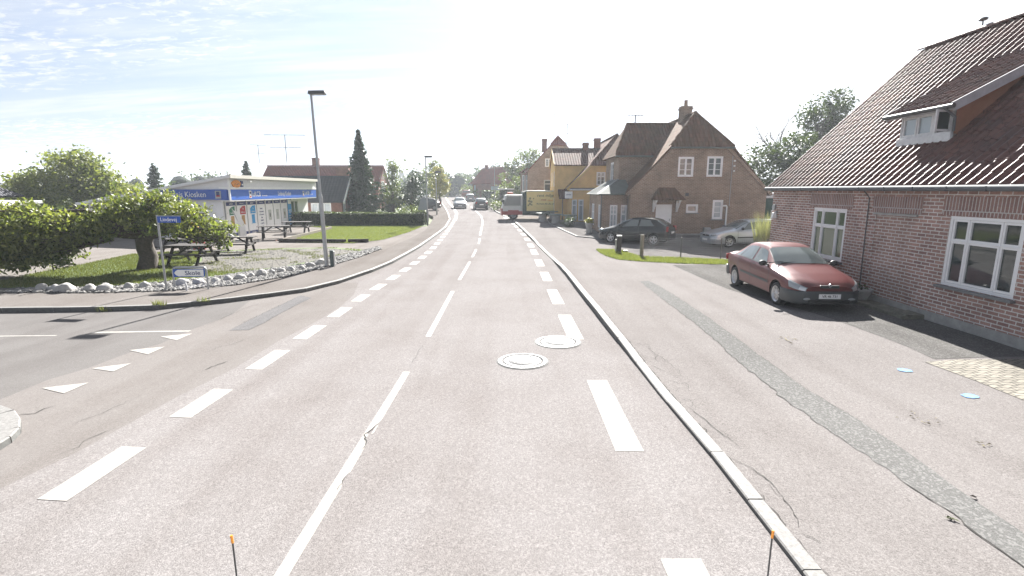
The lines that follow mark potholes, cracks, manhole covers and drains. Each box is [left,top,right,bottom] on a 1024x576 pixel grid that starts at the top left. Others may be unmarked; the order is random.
crack [641,344,738,446]
manhole cover [496,353,549,370]
crack [667,292,1024,567]
manhole cover [534,336,582,349]
